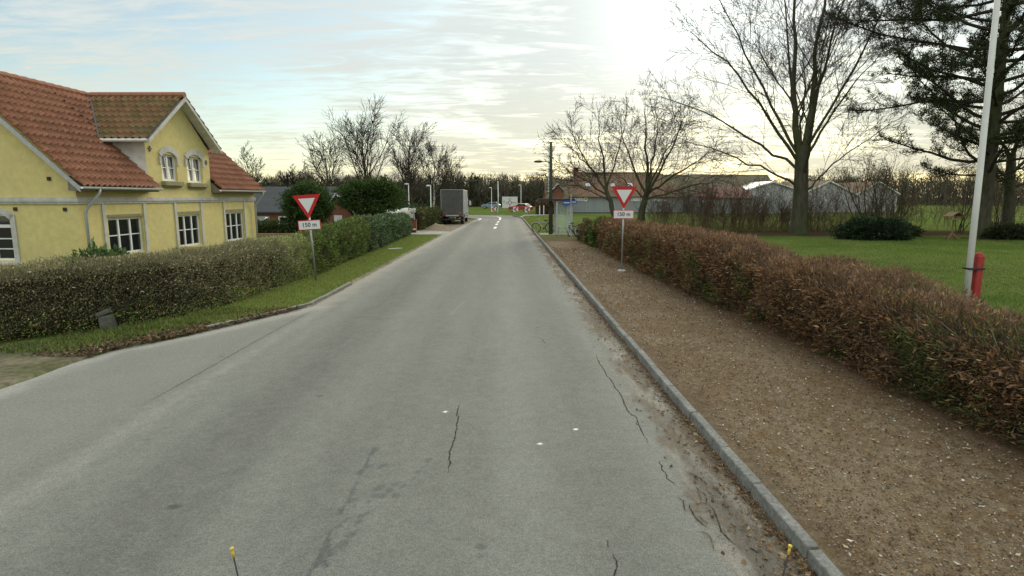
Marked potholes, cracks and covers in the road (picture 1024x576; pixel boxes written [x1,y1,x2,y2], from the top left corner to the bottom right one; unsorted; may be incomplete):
crack [598,361,651,447]
crack [448,408,459,471]
crack [681,471,736,548]
